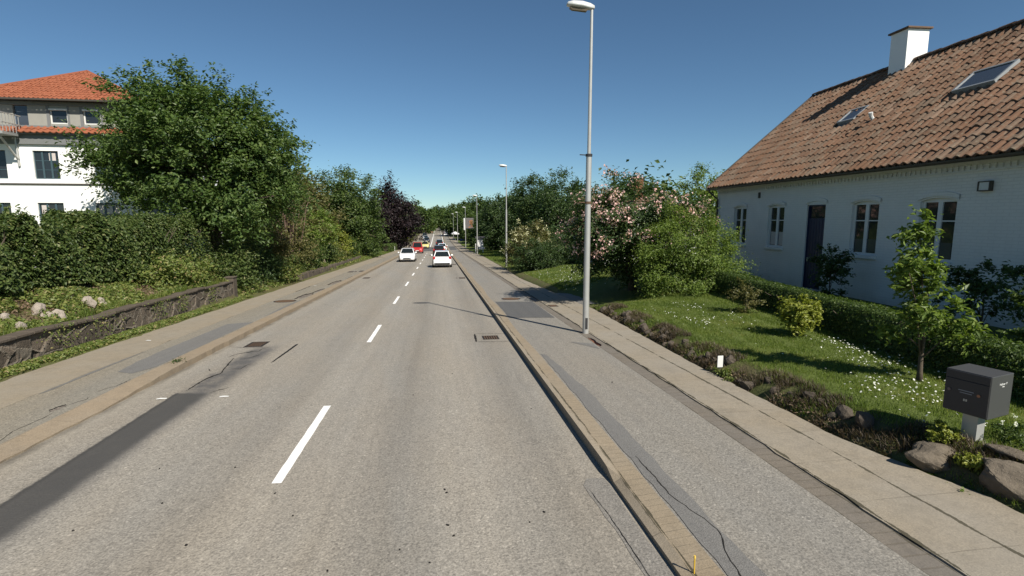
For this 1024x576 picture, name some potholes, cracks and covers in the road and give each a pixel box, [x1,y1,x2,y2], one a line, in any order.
crack [637,457,741,576]
crack [593,494,650,576]
crack [186,347,264,392]
